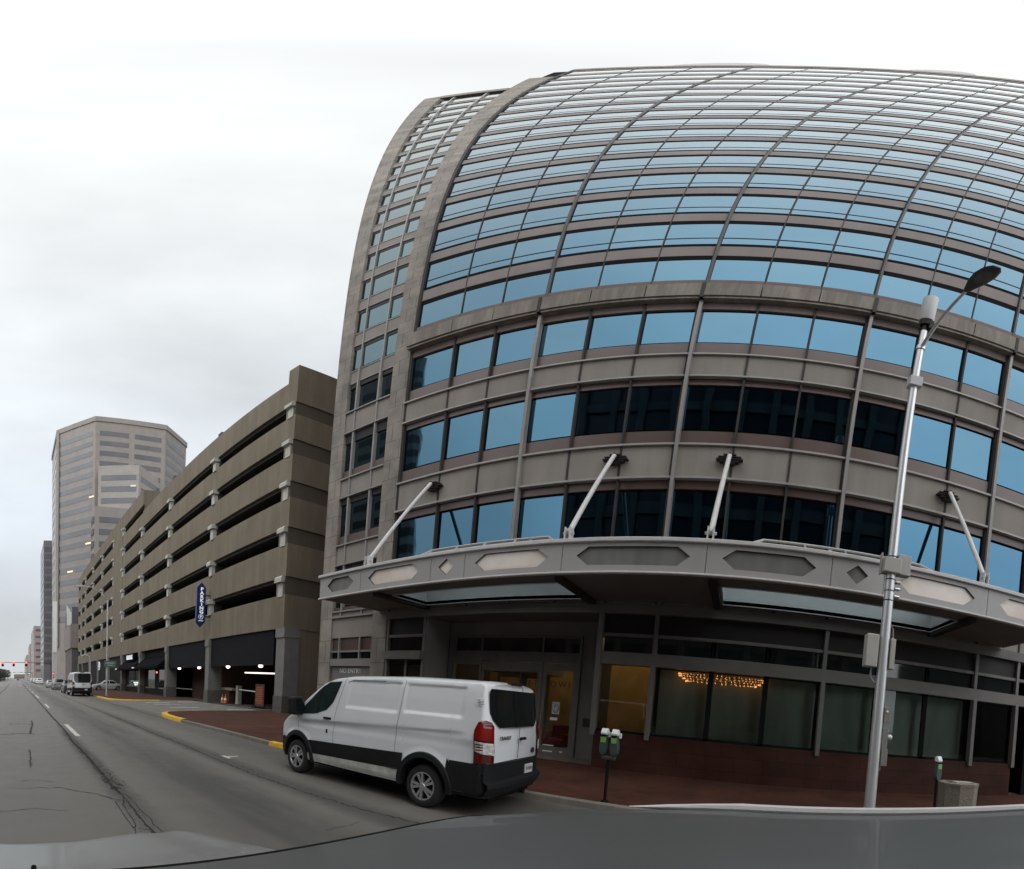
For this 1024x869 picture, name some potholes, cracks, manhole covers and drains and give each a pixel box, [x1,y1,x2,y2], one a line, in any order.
crack [0,720,120,800]
